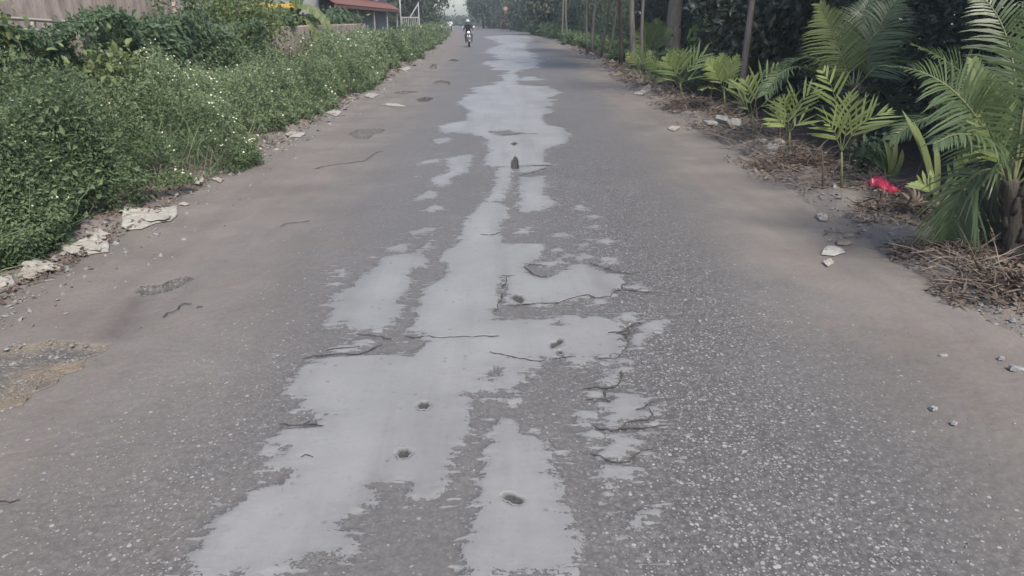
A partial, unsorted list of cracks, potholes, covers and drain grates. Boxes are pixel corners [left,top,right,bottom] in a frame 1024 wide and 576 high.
pothole [416,401,432,410]
crack [303,333,576,361]
crack [582,322,666,431]
pothole [548,338,565,350]
pothole [349,128,385,139]
crack [590,448,653,463]
pothole [136,276,194,296]
pothole [499,492,526,505]
pothole [394,448,414,459]
crack [494,263,652,311]
